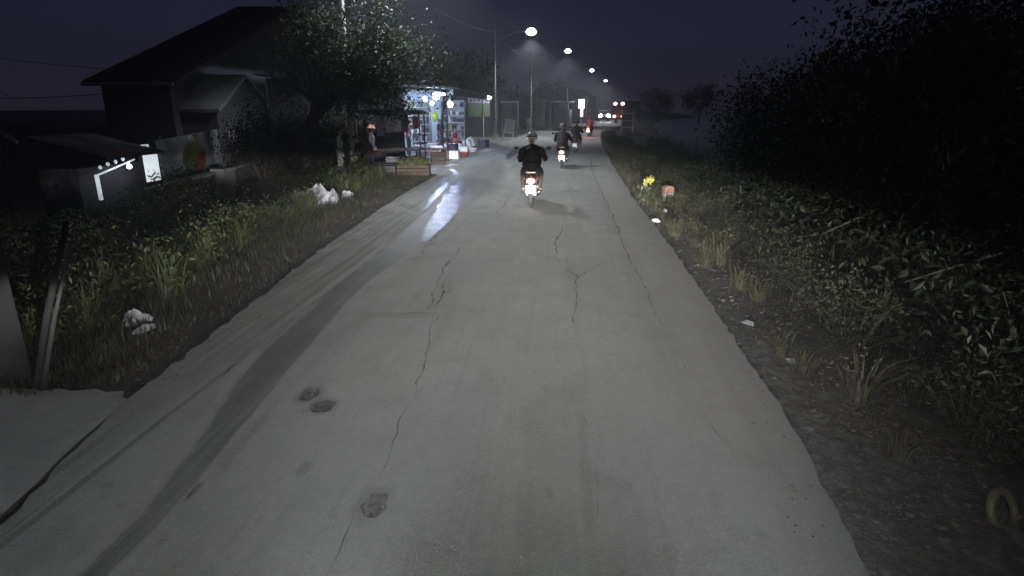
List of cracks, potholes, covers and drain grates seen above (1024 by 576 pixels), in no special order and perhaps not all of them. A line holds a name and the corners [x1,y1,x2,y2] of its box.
pothole [299,387,320,401]
crack [554,156,730,449]
pothole [309,400,337,413]
crack [331,199,509,566]
pothole [360,493,388,518]
